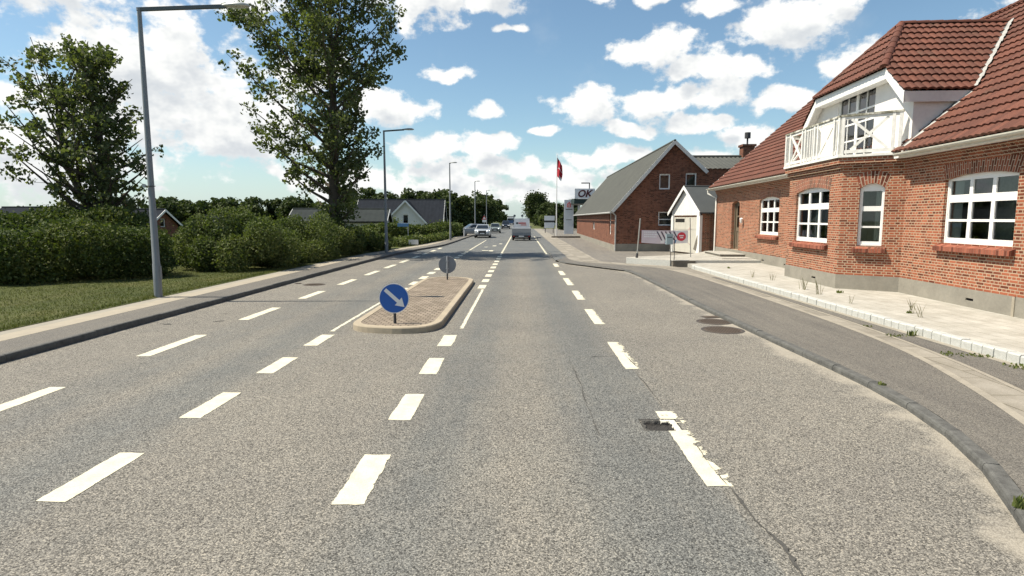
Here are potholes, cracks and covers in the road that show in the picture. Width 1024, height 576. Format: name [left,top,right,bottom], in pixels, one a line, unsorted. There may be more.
manhole cover [701,326,745,334]
pothole [638,419,683,431]
crack [569,356,605,435]
